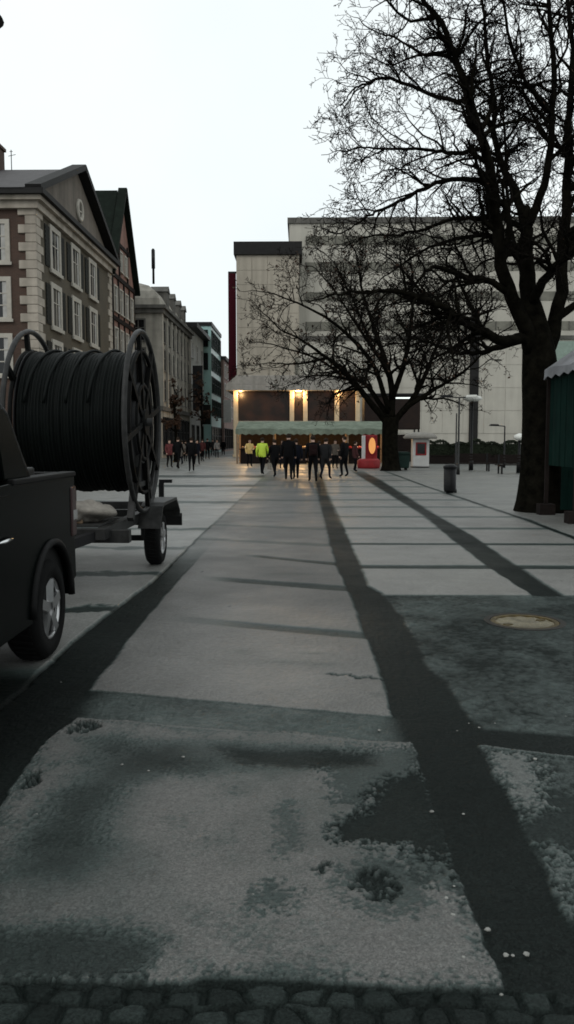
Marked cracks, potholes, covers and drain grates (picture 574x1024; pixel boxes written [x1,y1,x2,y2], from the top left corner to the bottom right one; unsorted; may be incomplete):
manhole cover [484,613,566,631]
